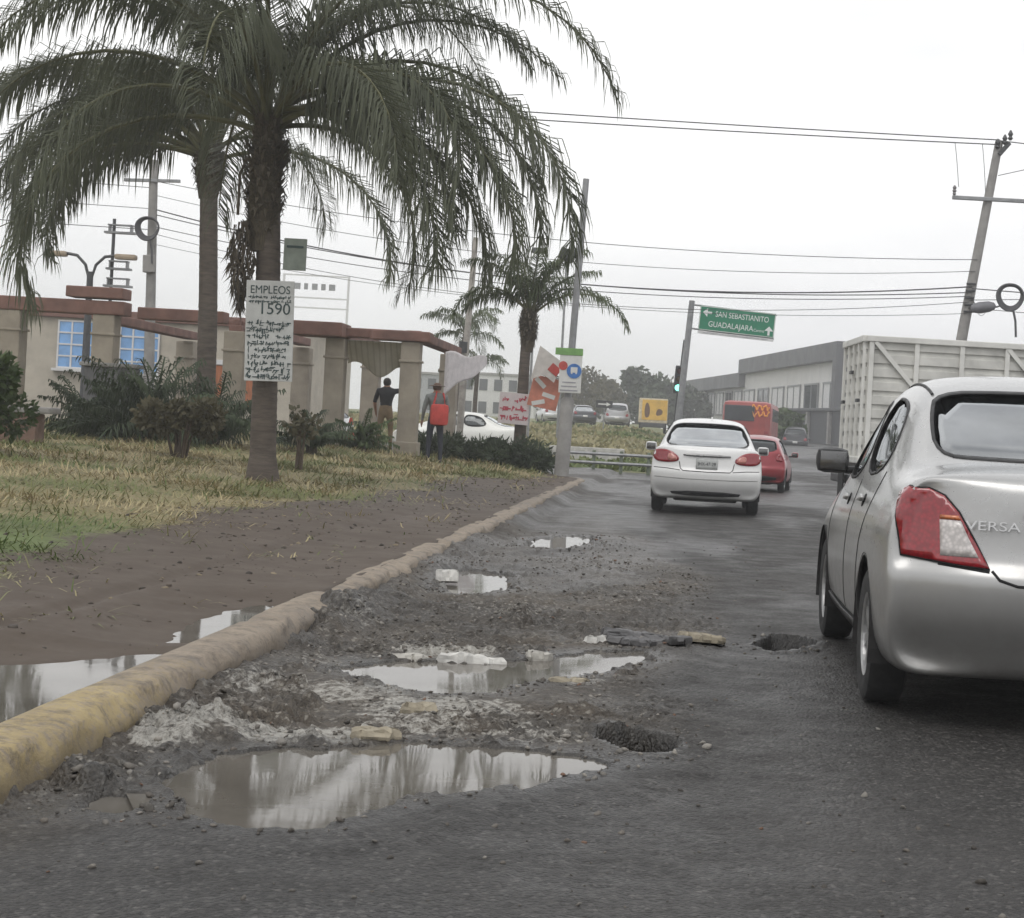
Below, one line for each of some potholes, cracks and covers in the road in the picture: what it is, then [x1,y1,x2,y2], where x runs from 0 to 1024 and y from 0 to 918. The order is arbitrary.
pothole [748,633,826,652]
pothole [508,533,610,548]
pothole [318,648,665,695]
pothole [587,719,692,754]
pothole [423,556,527,595]
pothole [126,737,626,833]
